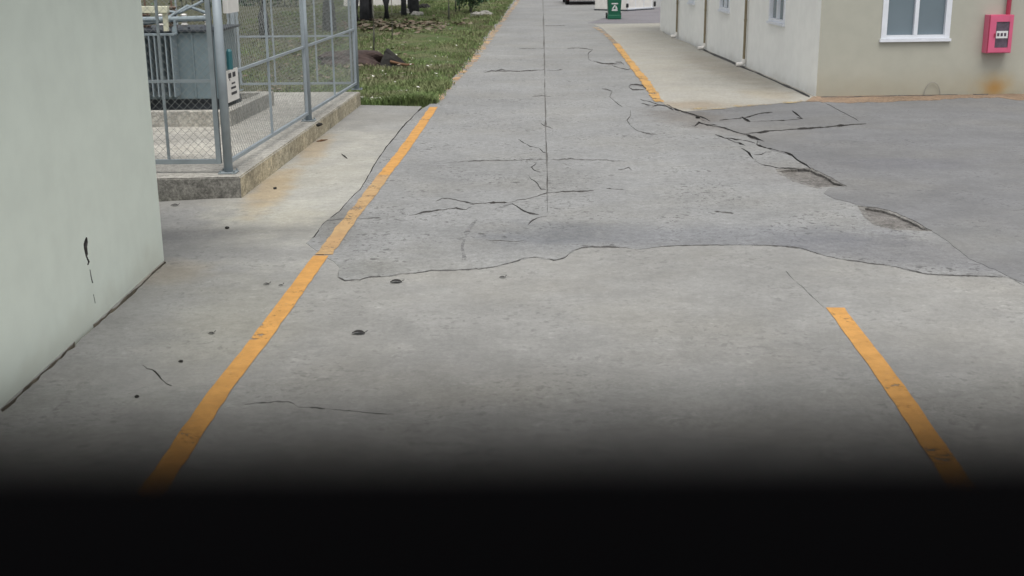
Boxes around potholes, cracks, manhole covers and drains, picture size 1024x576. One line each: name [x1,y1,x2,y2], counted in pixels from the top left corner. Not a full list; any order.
crack [723,111,862,135]
crack [567,48,673,135]
pothole [858,206,932,231]
pothole [776,168,846,188]
crack [409,123,630,242]
